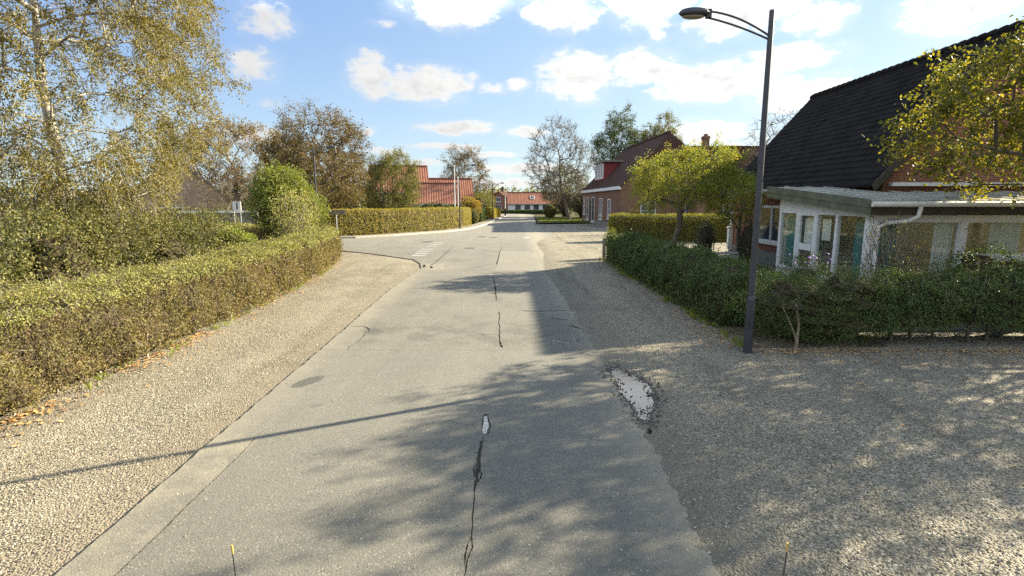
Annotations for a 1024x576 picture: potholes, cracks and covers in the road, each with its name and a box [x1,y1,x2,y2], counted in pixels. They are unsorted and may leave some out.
pothole [605,365,658,424]
crack [475,276,503,348]
crack [464,436,484,576]
